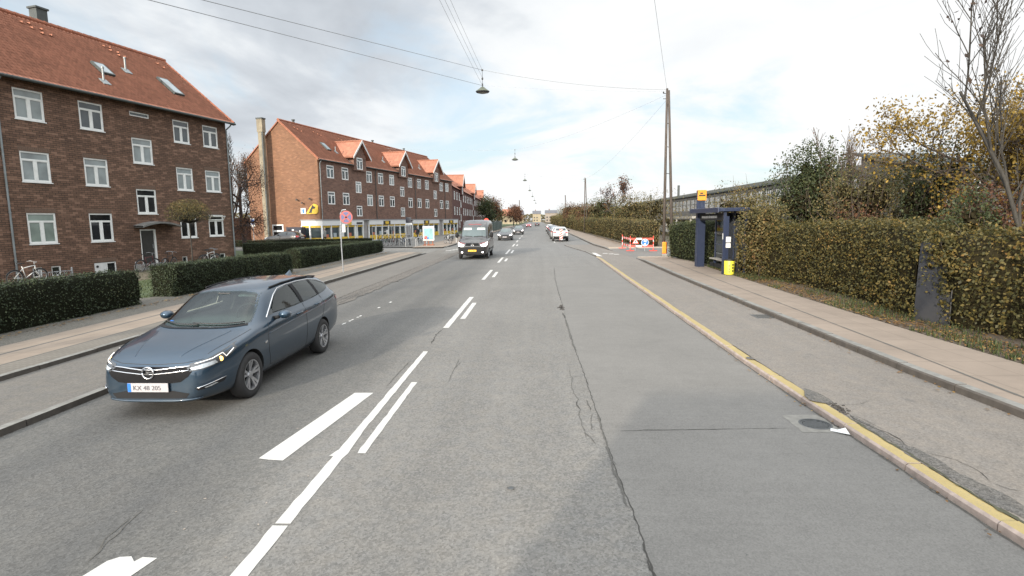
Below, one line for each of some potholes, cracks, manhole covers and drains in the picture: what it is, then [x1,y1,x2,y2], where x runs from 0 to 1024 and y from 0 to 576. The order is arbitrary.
crack [554,269,749,576]
crack [90,510,142,560]
crack [816,392,907,447]
manhole cover [783,415,839,433]
